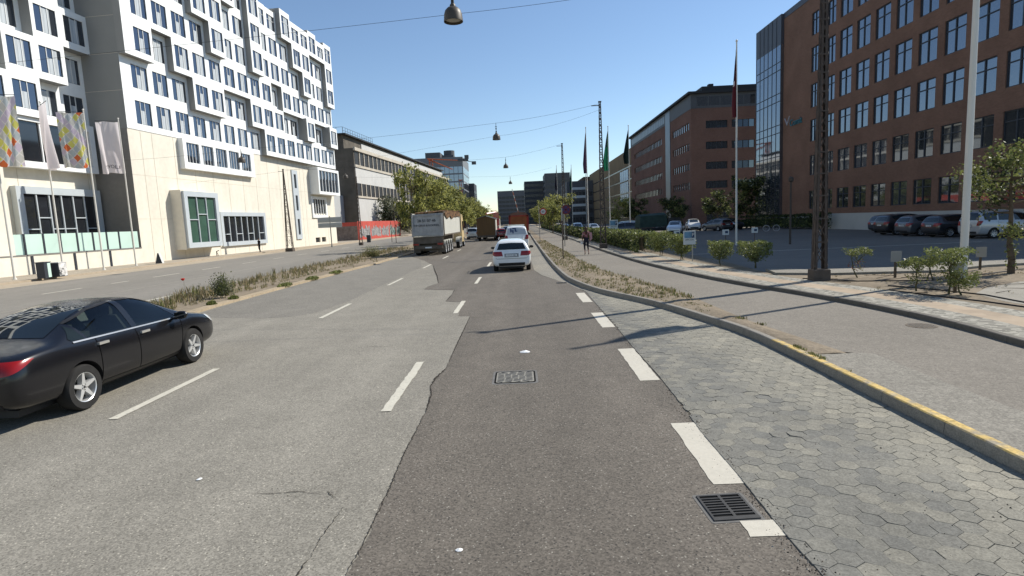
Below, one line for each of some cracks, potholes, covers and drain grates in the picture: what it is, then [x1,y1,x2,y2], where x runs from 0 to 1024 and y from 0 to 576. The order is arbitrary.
drain grate [692,492,765,524]
crack [266,491,343,576]
manhole cover [492,370,538,385]
